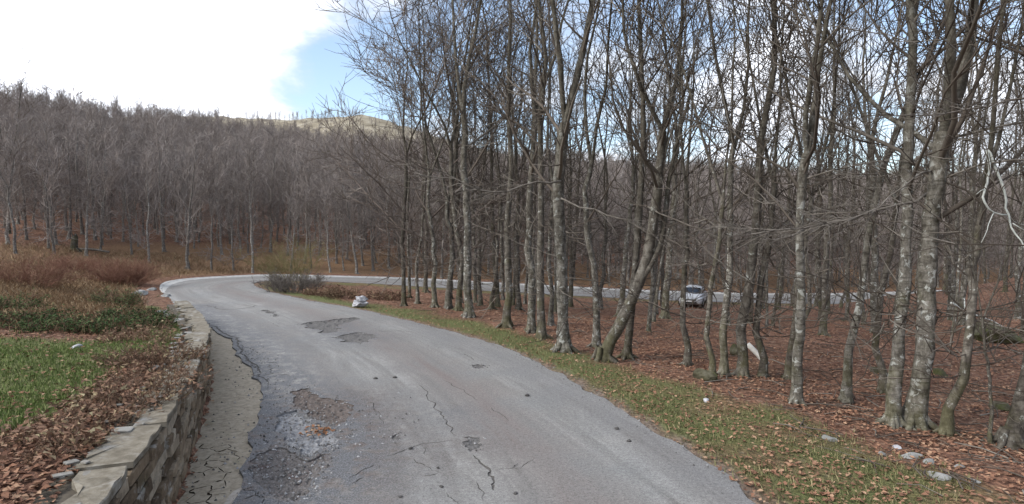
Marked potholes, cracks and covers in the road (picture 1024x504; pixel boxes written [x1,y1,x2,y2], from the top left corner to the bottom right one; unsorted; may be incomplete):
crack [185,444,264,504]
pothole [462,436,480,452]
crack [393,380,530,502]
pothole [273,410,343,457]
pothole [250,447,325,501]
pothole [290,388,354,425]
